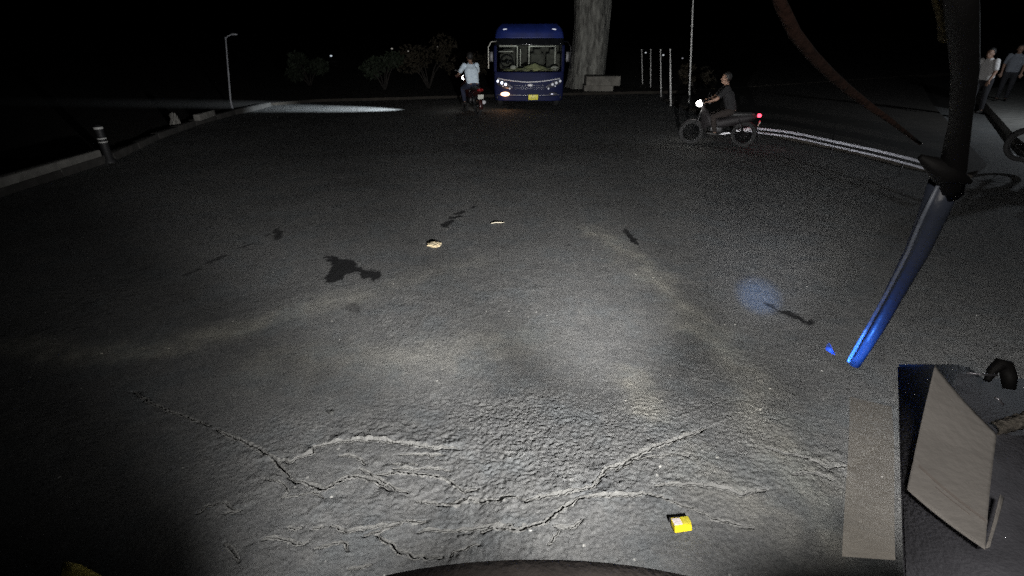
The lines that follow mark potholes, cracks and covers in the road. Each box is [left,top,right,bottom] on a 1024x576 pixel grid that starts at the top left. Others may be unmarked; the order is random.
crack [134,391,847,570]
